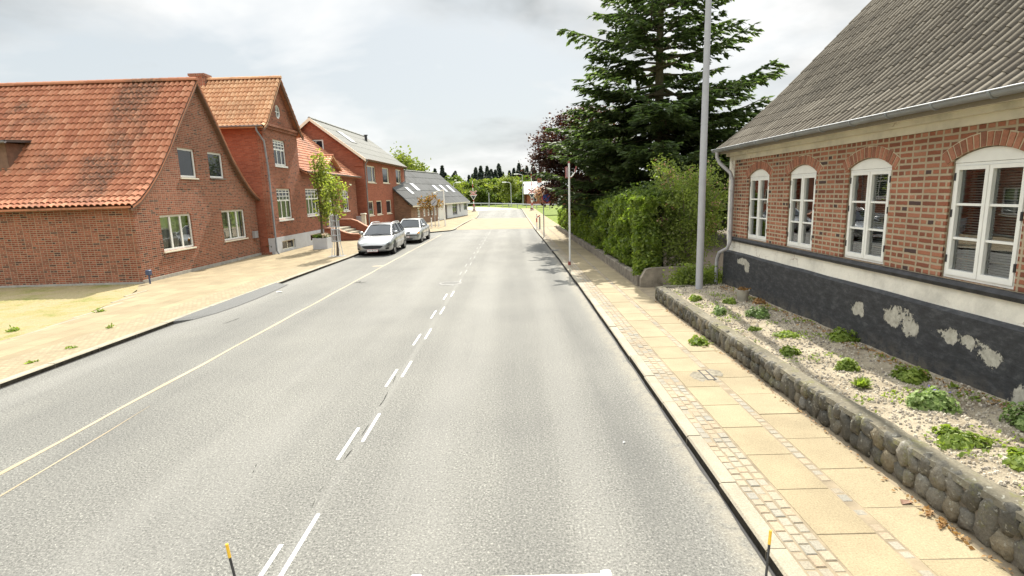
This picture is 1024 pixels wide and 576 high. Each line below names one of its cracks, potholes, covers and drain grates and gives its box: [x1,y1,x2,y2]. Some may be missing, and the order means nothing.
utility cover [690,369,723,382]
